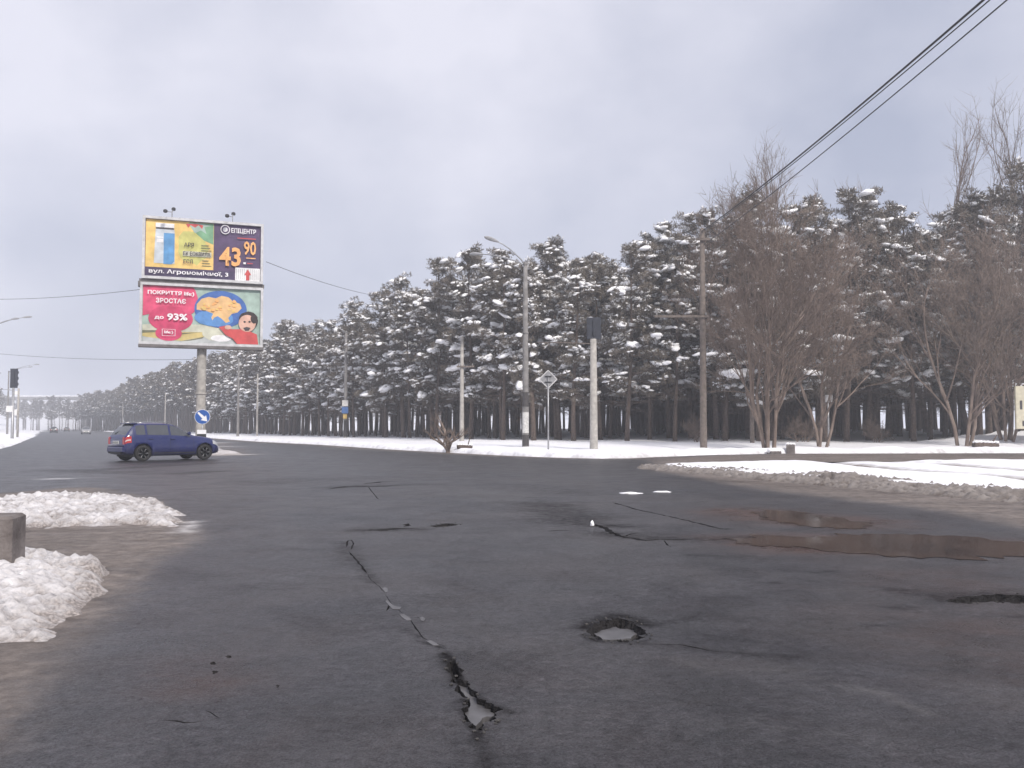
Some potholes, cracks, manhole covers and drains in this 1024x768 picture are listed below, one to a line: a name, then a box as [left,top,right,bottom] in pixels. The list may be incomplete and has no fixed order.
crack [594,503,728,547]
crack [331,482,403,498]
crack [341,523,445,647]
pothole [582,616,653,645]
pothole [945,593,1024,604]
